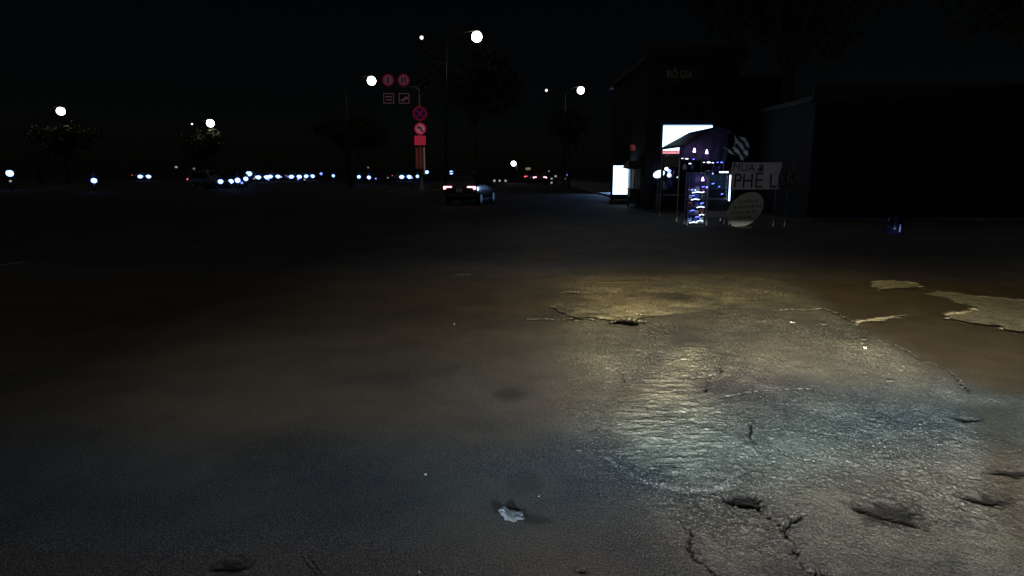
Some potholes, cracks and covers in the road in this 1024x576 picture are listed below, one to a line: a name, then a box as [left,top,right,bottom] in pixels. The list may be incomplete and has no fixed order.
pothole [981,465,1024,480]
crack [892,344,973,394]
pothole [714,487,769,512]
crack [746,419,822,465]
pothole [836,494,935,533]
crack [696,364,817,399]
pothole [608,316,653,327]
pothole [950,415,984,424]
crack [679,520,724,576]
pothole [950,490,1017,512]
crack [524,291,602,321]
crack [757,509,845,576]
